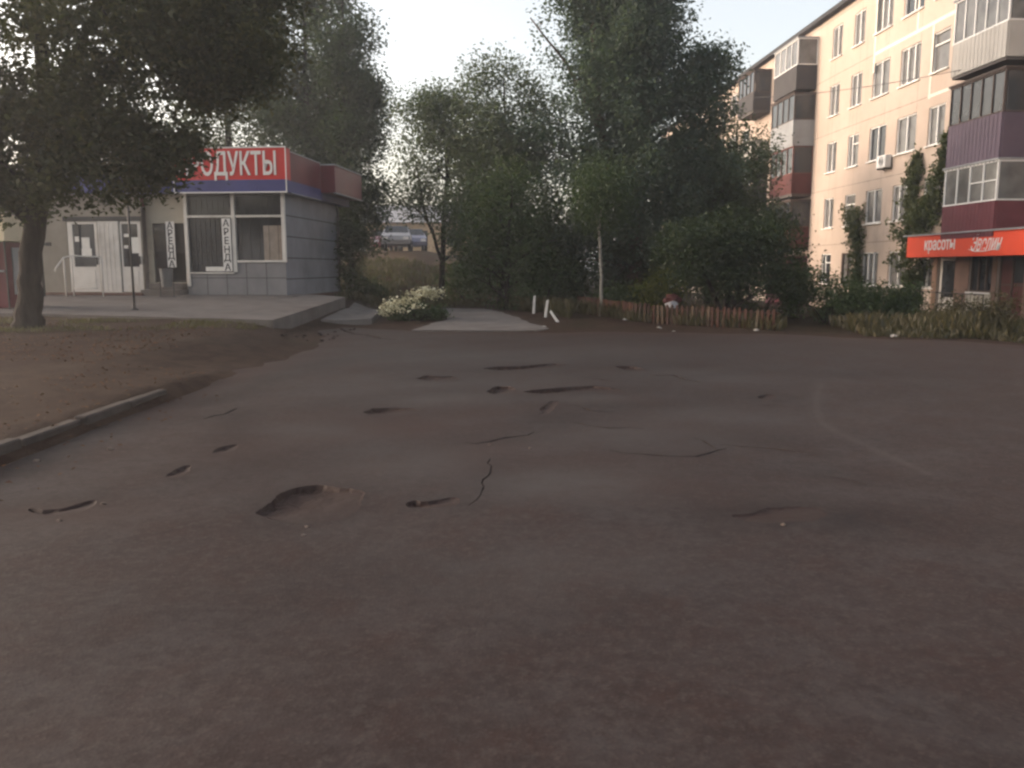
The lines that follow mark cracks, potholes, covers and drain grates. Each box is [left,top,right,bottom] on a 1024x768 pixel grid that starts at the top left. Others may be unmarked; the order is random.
pothole [523,386,633,395]
pothole [166,465,192,478]
pothole [255,485,365,523]
pothole [538,401,559,415]
crack [469,432,534,505]
pothole [212,444,238,454]
pothole [28,500,97,516]
pothole [406,497,460,508]
crack [611,438,818,457]
pothole [486,386,518,394]
